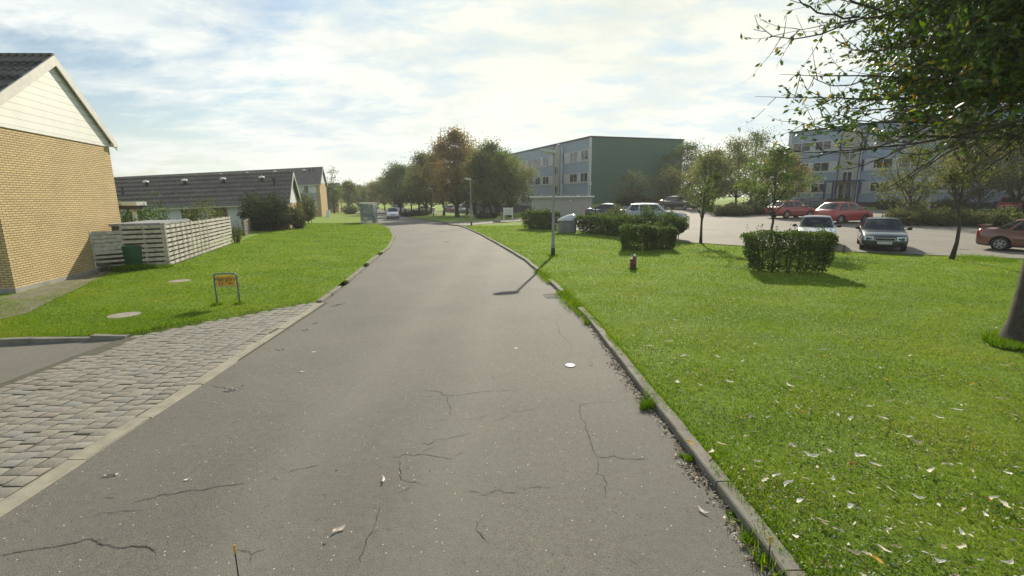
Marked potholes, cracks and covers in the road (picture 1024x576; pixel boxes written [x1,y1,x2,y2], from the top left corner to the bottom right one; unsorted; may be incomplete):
crack [97,483,244,515]
crack [358,390,510,567]
crack [579,404,642,496]
crack [2,538,156,555]
